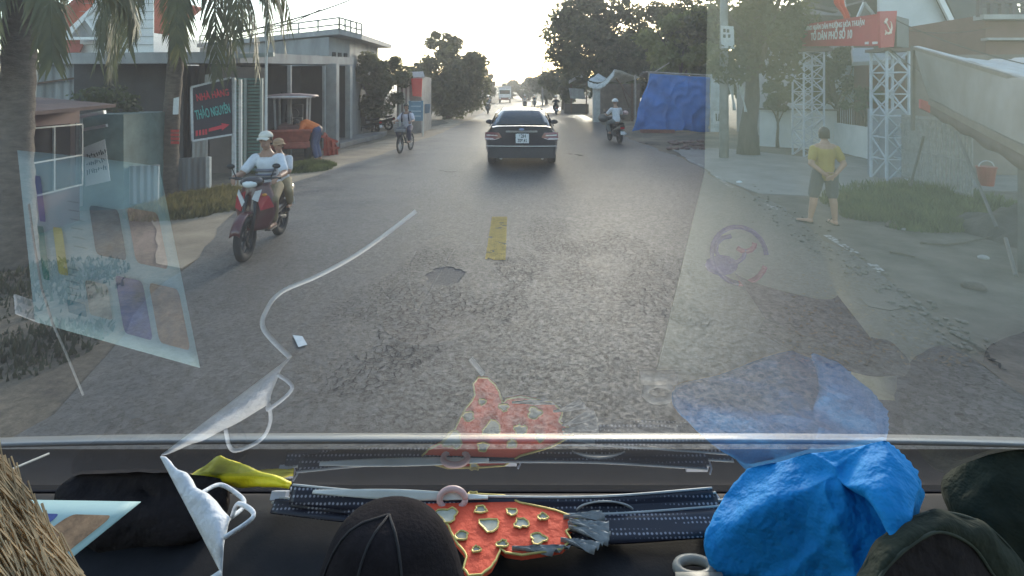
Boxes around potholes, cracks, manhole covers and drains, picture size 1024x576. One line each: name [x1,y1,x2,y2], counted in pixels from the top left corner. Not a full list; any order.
pothole [424,266,466,286]
crack [325,249,548,395]
crack [967,340,1007,370]
